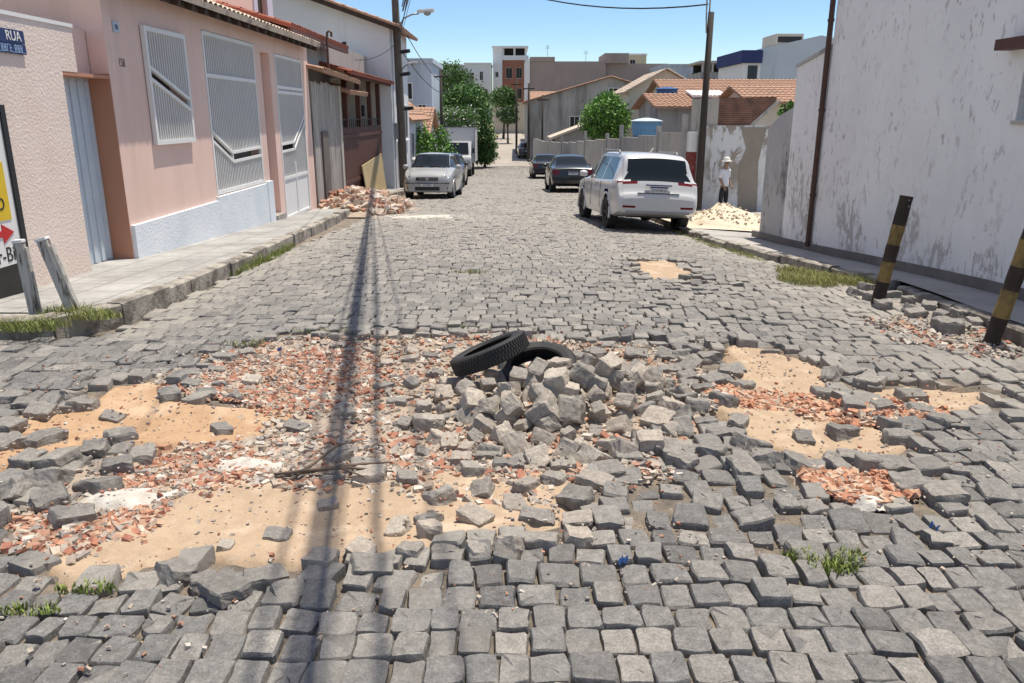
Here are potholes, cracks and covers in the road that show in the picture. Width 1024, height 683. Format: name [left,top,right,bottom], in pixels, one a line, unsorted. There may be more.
pothole [874,387,986,411]
pothole [49,469,575,591]
pothole [11,337,719,546]
pothole [717,345,907,459]
pothole [789,475,918,514]
pothole [637,260,691,279]
